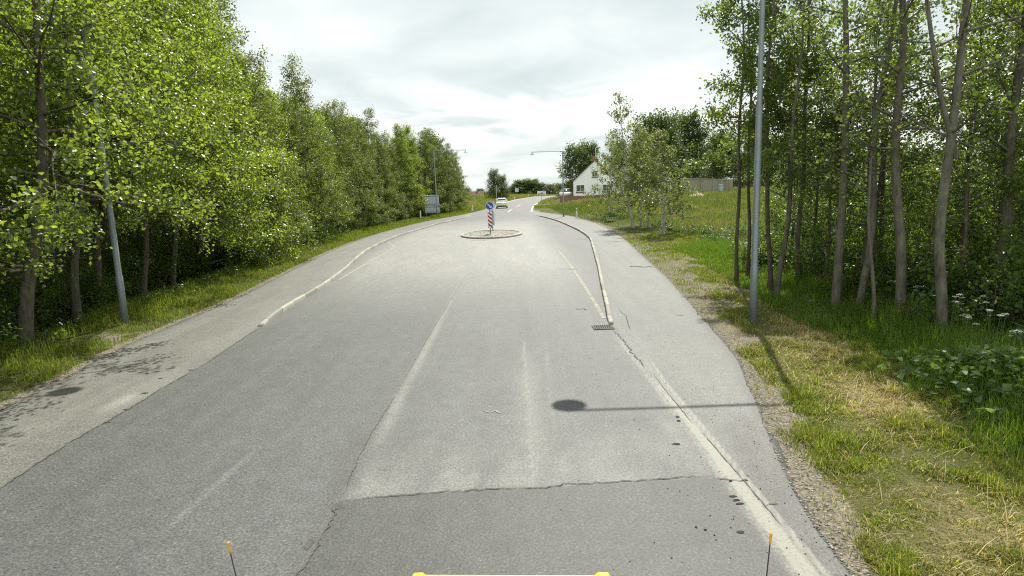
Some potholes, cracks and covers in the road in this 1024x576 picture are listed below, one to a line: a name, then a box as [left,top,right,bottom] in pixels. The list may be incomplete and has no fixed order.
crack [294,503,342,576]
